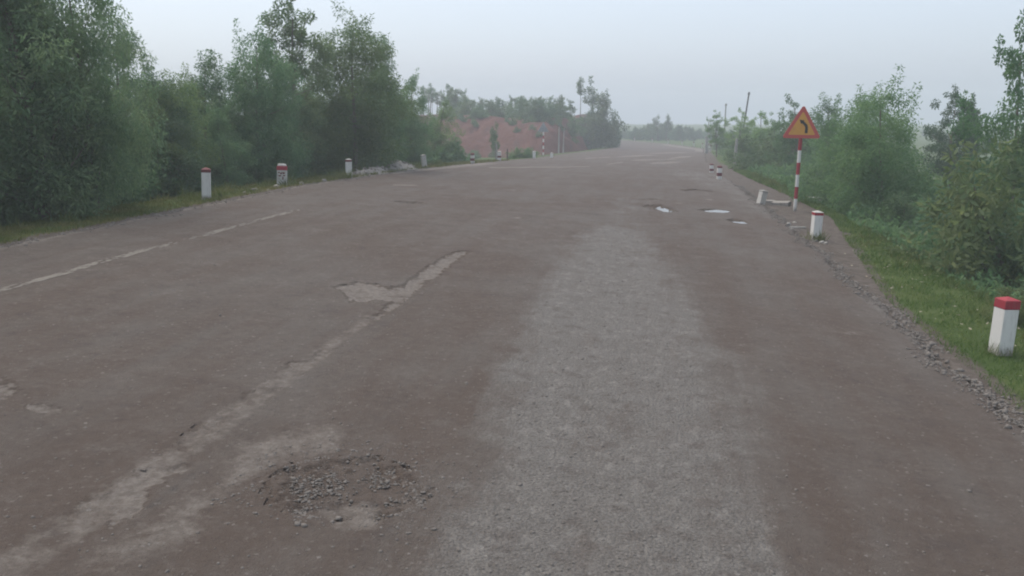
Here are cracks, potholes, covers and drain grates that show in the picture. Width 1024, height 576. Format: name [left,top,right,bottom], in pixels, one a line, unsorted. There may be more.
pothole [252,452,442,526]
pothole [637,204,683,213]
